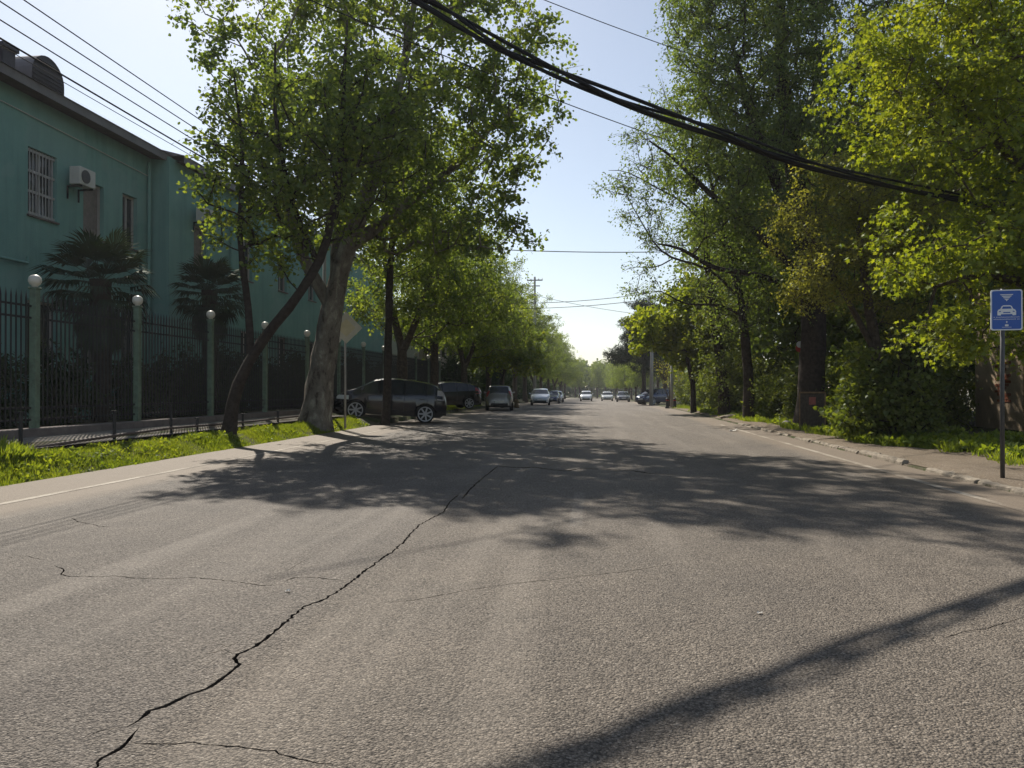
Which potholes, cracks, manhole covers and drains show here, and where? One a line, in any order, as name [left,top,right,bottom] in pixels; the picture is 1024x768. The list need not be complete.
crack [11,466,666,768]
